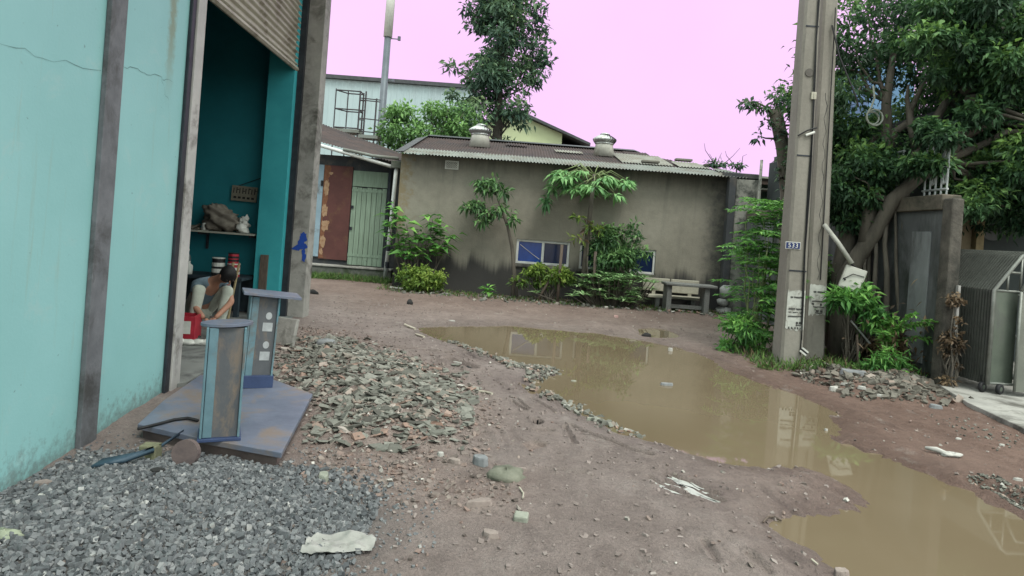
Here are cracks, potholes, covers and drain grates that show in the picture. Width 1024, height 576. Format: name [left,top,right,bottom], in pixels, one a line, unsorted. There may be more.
pothole [405,322,1024,576]
